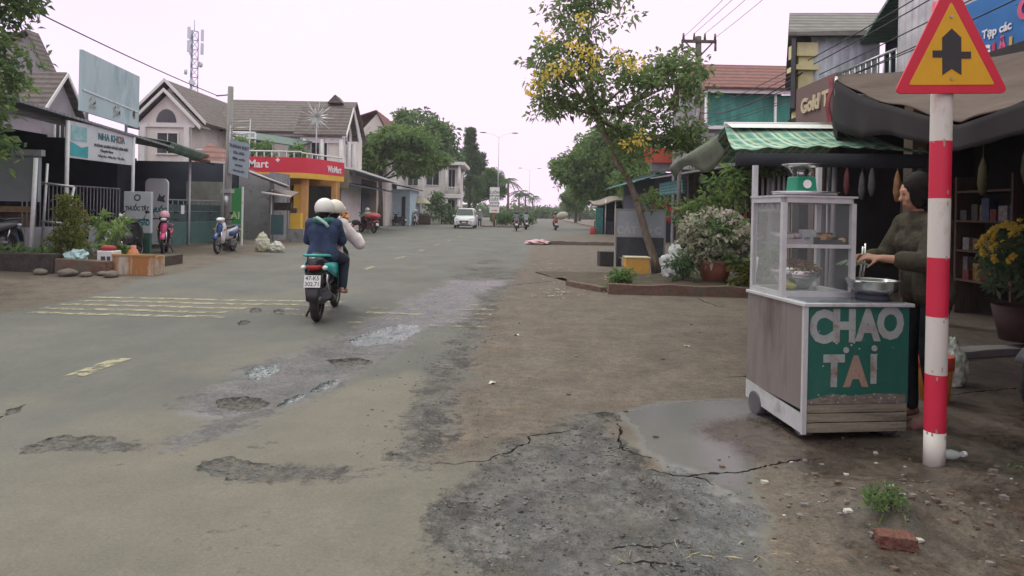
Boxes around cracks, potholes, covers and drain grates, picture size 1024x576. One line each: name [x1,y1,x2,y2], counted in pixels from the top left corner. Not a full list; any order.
pothole [216,396,270,412]
pothole [19,435,119,454]
pothole [0,404,26,418]
crack [435,424,822,486]
pothole [276,393,306,407]
crack [612,542,684,571]
pothole [326,358,374,366]
pothole [245,365,283,380]
pothole [310,379,342,392]
pothole [347,324,421,346]
pothole [196,456,280,481]
